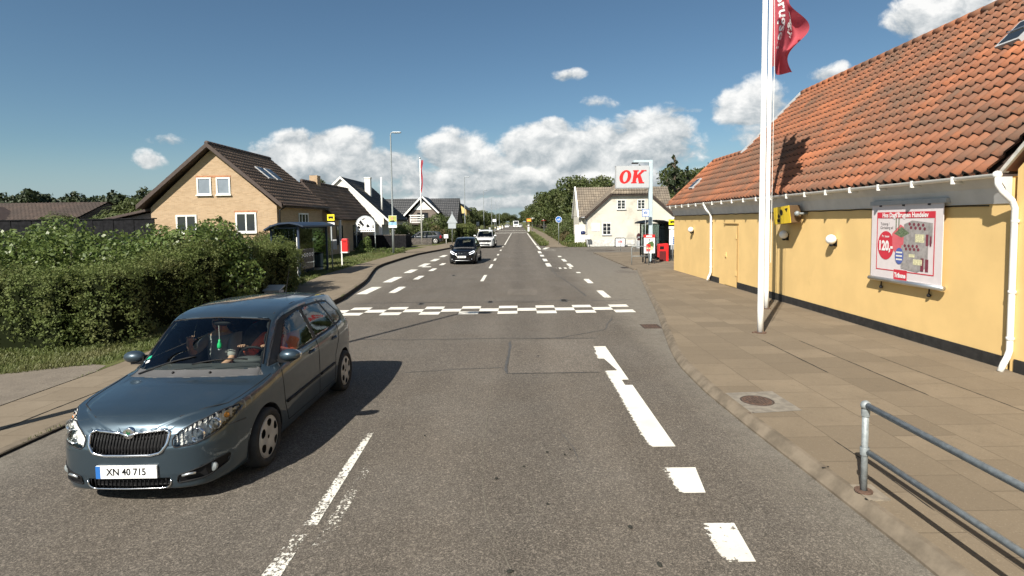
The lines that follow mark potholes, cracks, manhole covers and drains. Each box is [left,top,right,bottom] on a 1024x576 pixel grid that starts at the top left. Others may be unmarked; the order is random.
manhole cover [740,395,775,406]
